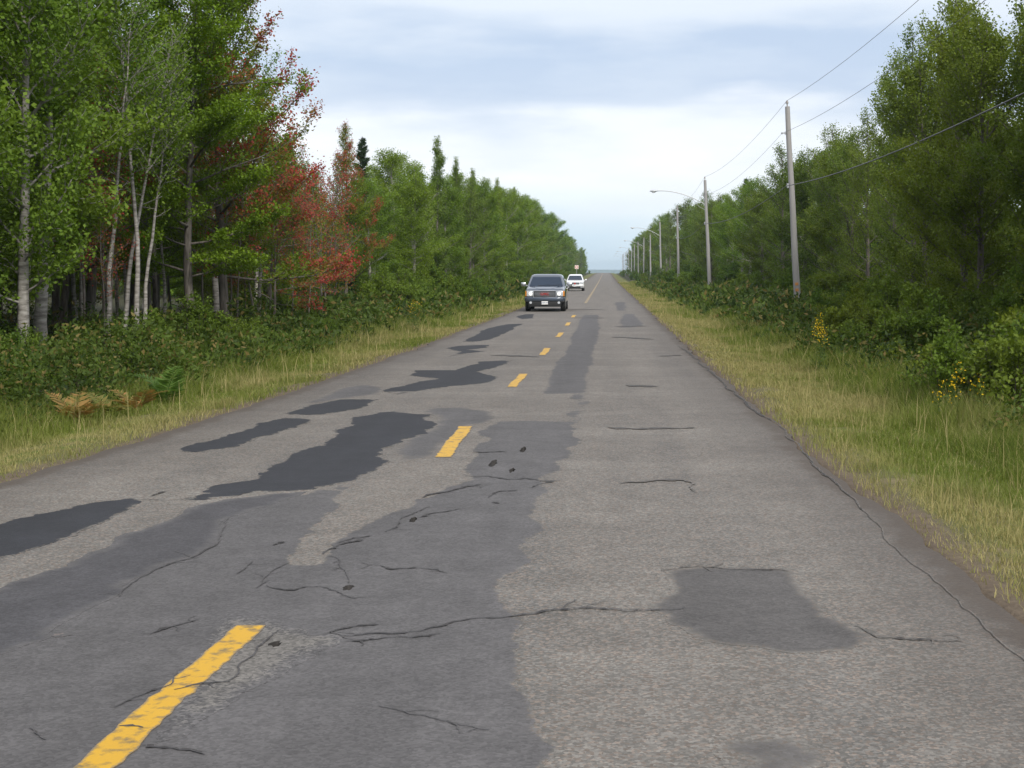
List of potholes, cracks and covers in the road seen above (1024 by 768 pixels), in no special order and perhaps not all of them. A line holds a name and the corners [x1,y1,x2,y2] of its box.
crack [151,615,199,633]
crack [103,474,554,598]
crack [330,599,684,645]
crack [380,705,490,733]
crack [617,326,1024,659]
